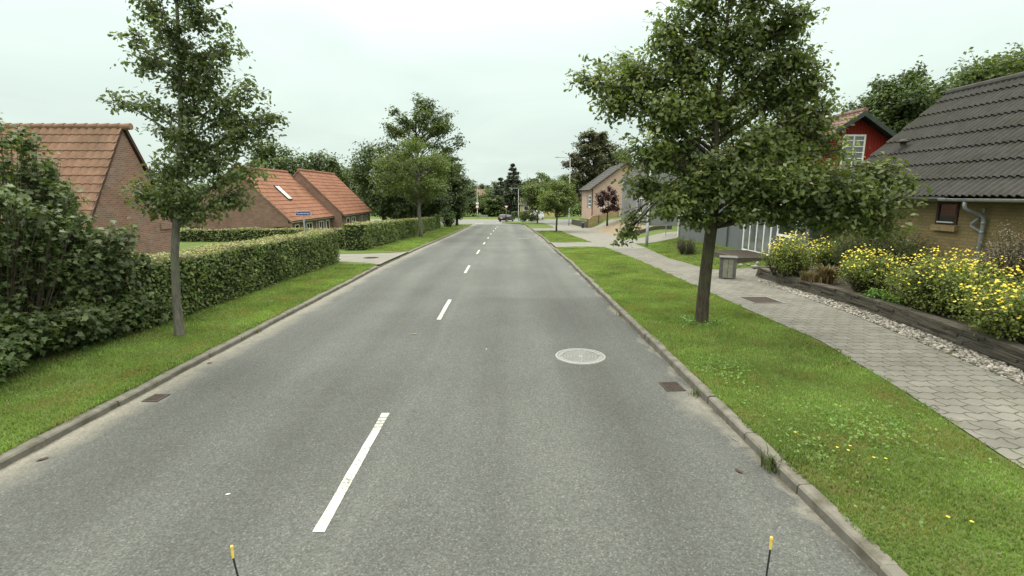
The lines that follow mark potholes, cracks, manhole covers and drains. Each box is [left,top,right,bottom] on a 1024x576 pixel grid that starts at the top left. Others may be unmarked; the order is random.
manhole cover [555,348,606,364]
drain grate [141,394,171,402]
drain grate [658,382,686,392]
